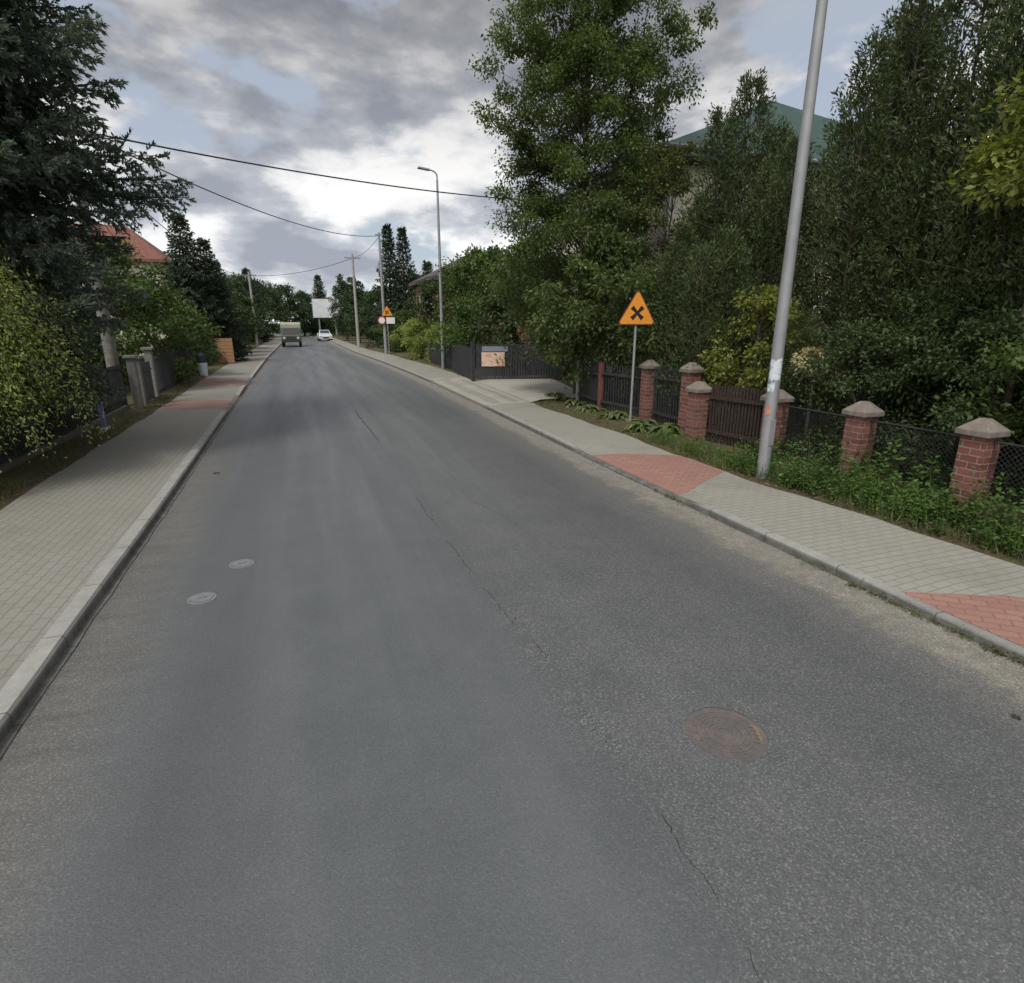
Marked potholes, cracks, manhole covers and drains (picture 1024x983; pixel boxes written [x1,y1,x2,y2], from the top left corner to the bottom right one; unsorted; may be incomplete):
utility cover [187,592,217,605]
crack [356,412,764,983]
utility cover [229,559,254,569]
manhole cover [684,707,769,762]
